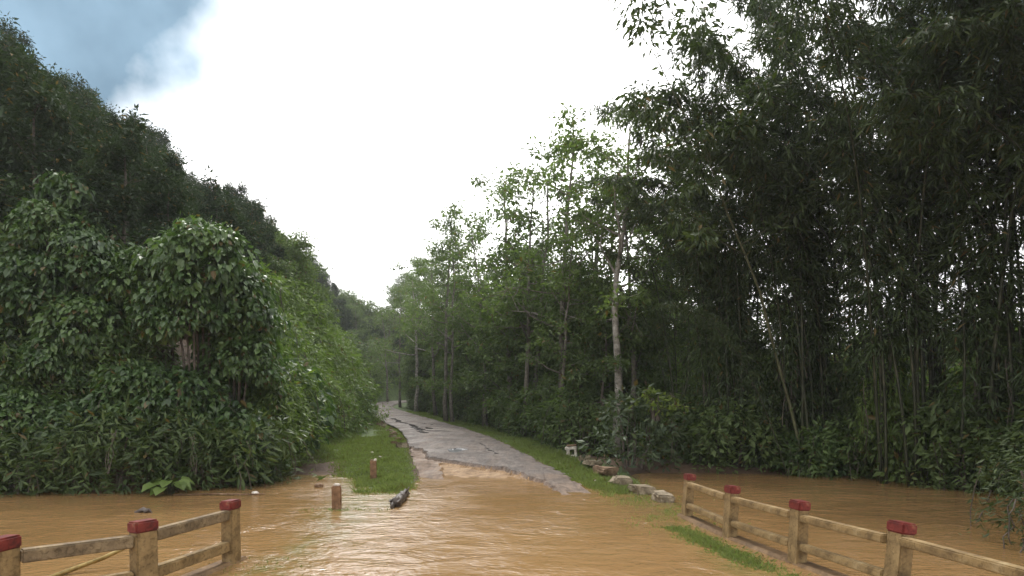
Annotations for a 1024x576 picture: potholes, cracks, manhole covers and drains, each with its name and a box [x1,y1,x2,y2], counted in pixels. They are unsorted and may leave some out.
crack [389,418,451,433]
